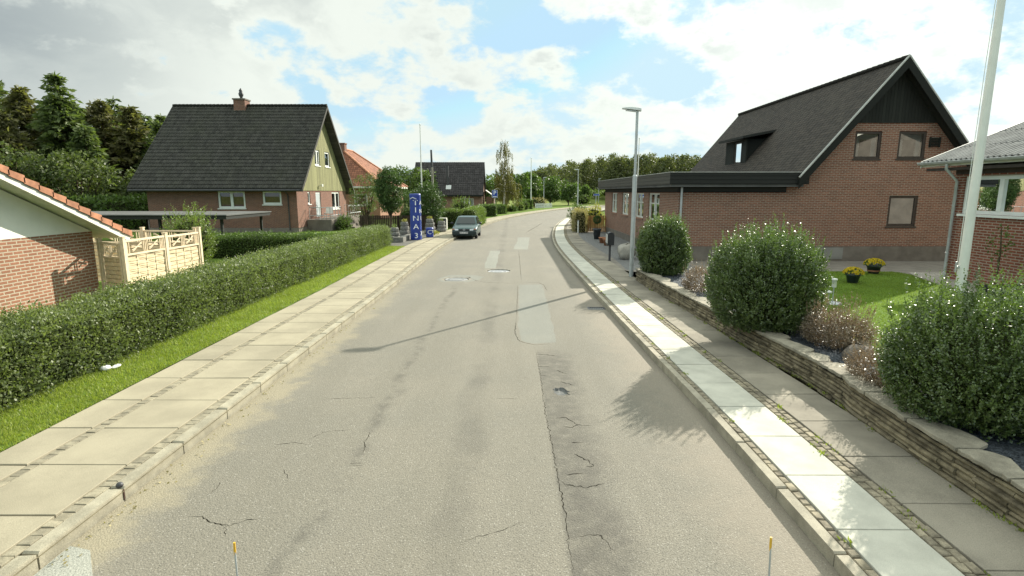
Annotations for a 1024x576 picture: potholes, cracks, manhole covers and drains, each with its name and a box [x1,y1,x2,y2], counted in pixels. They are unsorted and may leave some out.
crack [514,287,613,573]
crack [187,516,263,535]
